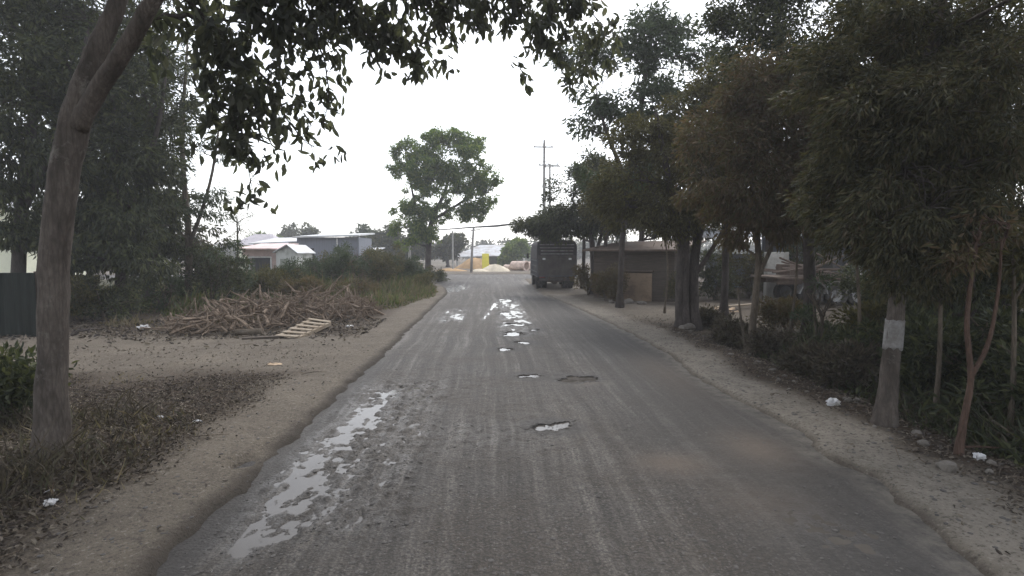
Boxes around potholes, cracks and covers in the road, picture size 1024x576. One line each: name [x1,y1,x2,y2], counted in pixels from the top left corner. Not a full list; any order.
pothole [523,419,578,433]
pothole [551,374,607,385]
